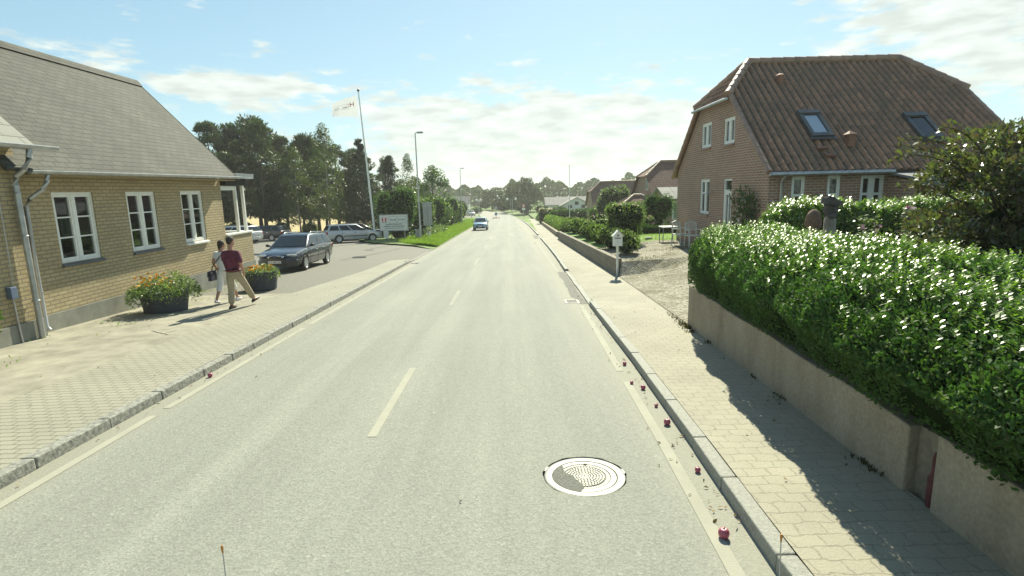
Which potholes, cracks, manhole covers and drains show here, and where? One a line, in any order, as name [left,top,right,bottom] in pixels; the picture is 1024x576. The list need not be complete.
manhole cover [544,458,626,497]
